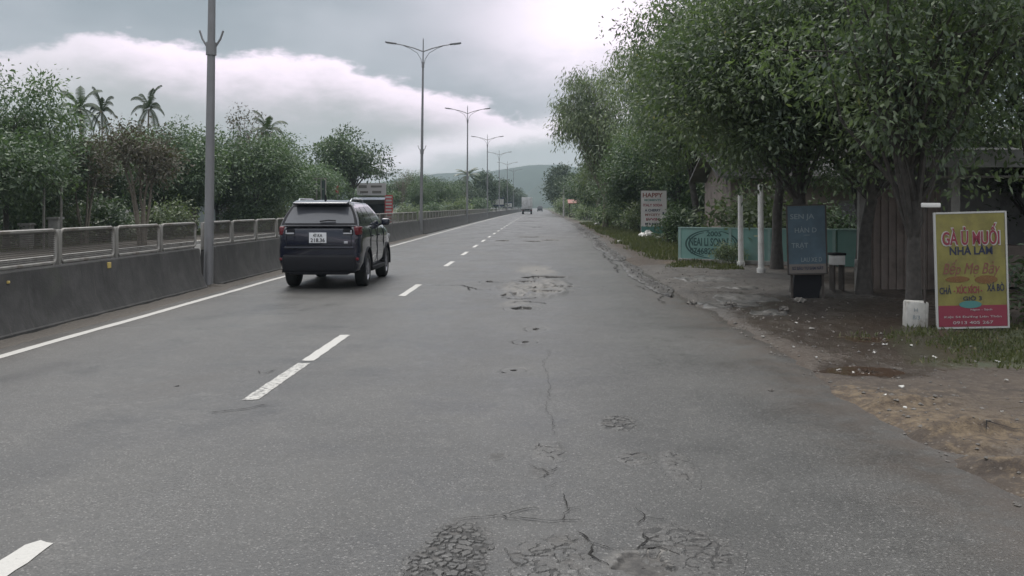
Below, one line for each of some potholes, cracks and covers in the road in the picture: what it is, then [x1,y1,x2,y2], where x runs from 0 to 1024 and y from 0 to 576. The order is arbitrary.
crack [387,360,748,576]
